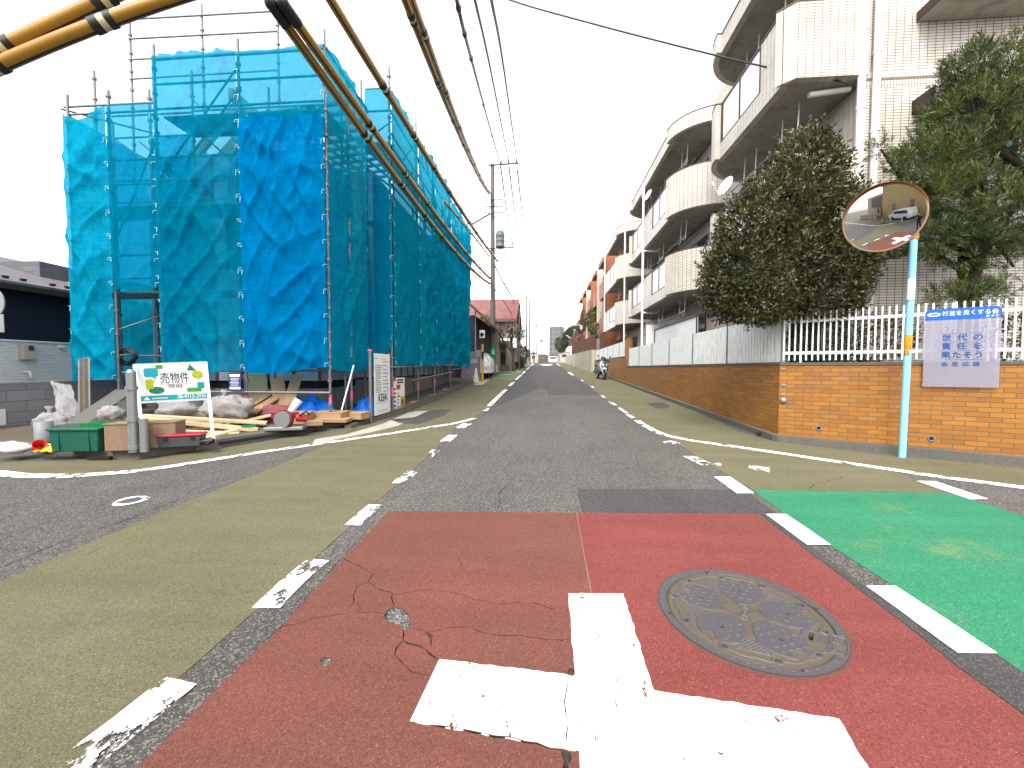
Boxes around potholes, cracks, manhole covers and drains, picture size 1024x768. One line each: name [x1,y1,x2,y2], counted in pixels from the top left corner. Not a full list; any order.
pothole [385,607,412,630]
crack [264,518,563,750]
manhole cover [656,569,854,680]
